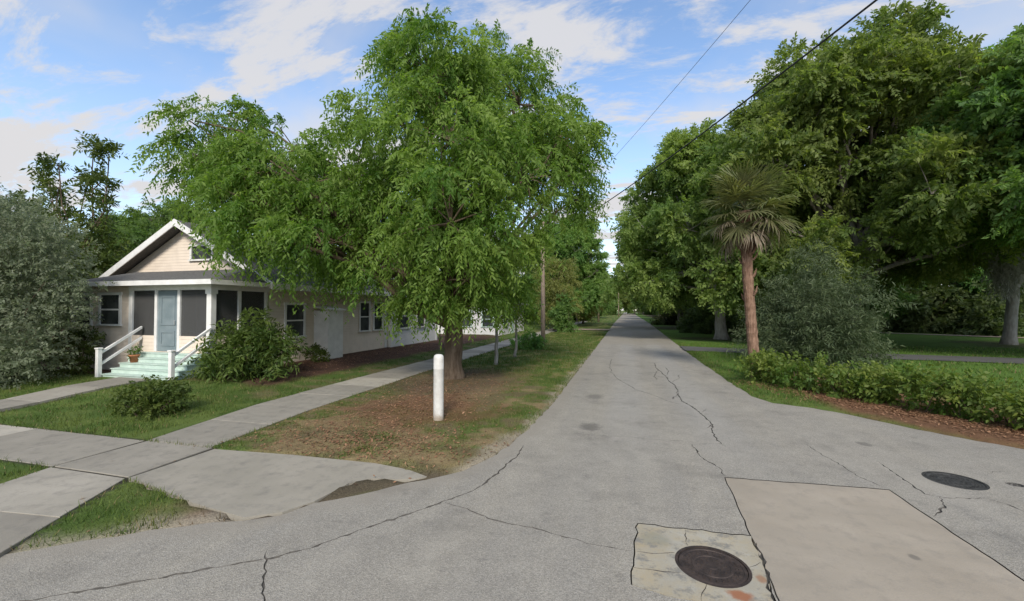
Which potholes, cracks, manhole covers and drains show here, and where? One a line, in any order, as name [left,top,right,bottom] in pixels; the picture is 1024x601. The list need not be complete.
crack [810,447,1020,516]
crack [571,359,724,475]
crack [21,447,628,601]
manhole cover [922,471,990,490]
